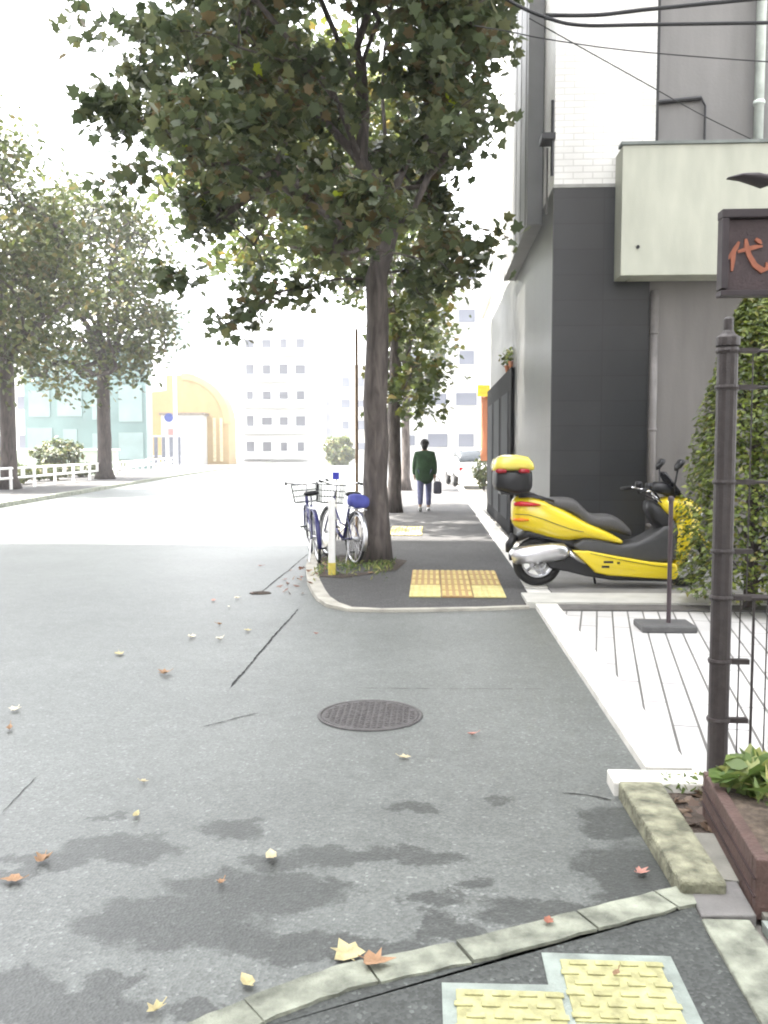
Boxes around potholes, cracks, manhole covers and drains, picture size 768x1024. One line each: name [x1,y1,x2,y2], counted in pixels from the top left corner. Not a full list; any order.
crack [231,609,298,686]
manhole cover [317,700,423,731]
